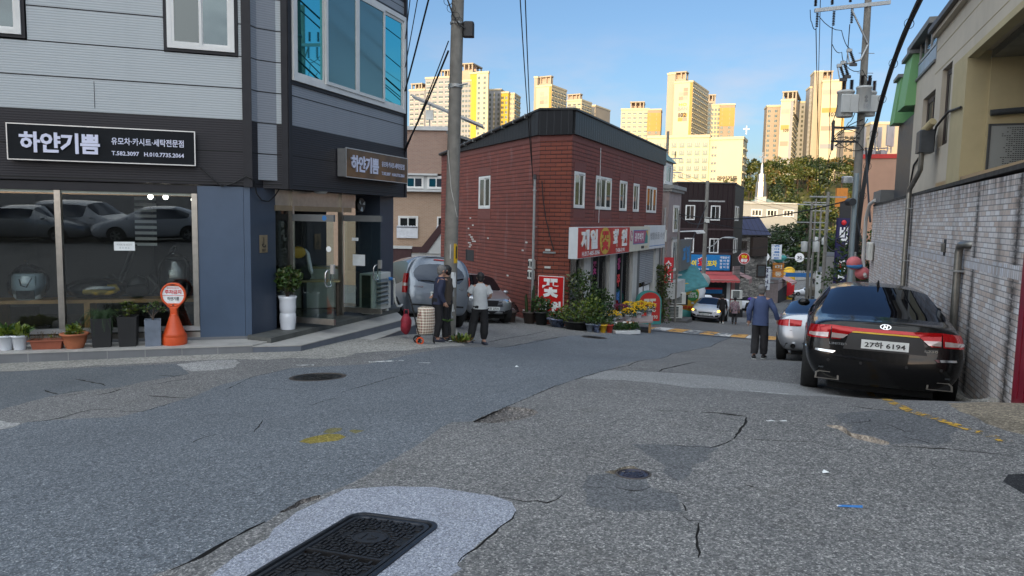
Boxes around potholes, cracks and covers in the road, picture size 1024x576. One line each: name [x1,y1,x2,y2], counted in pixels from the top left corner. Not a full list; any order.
crack [36,374,193,422]
pothole [827,425,889,445]
manhole cover [289,372,347,381]
manhole cover [615,468,652,480]
crack [457,495,562,564]
crack [587,486,701,558]
crack [659,410,830,448]
pothole [475,407,538,423]
